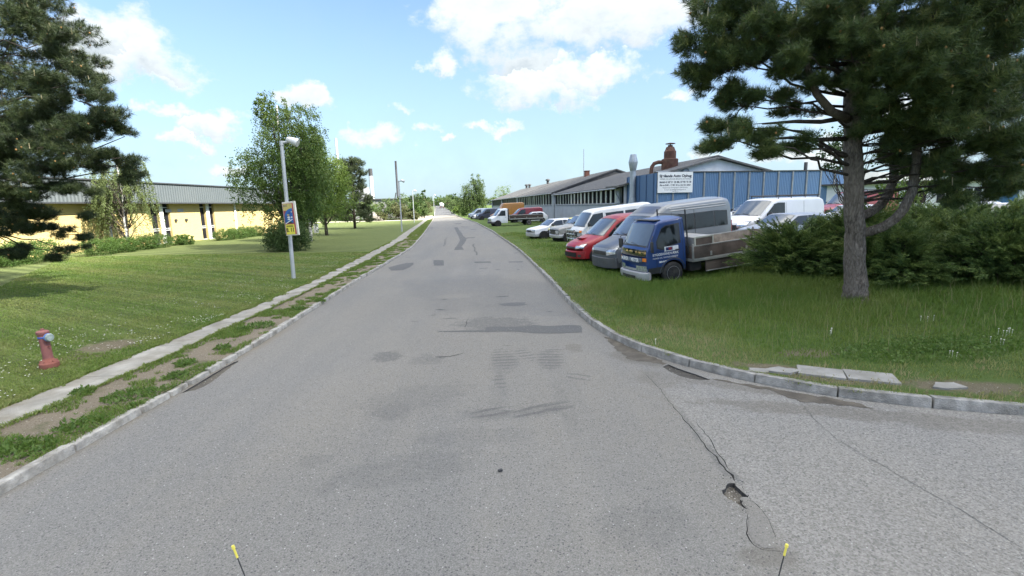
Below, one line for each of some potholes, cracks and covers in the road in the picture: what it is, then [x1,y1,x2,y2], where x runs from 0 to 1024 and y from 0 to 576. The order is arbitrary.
pothole [711,475,762,517]
crack [746,503,781,552]
crack [649,378,735,481]
